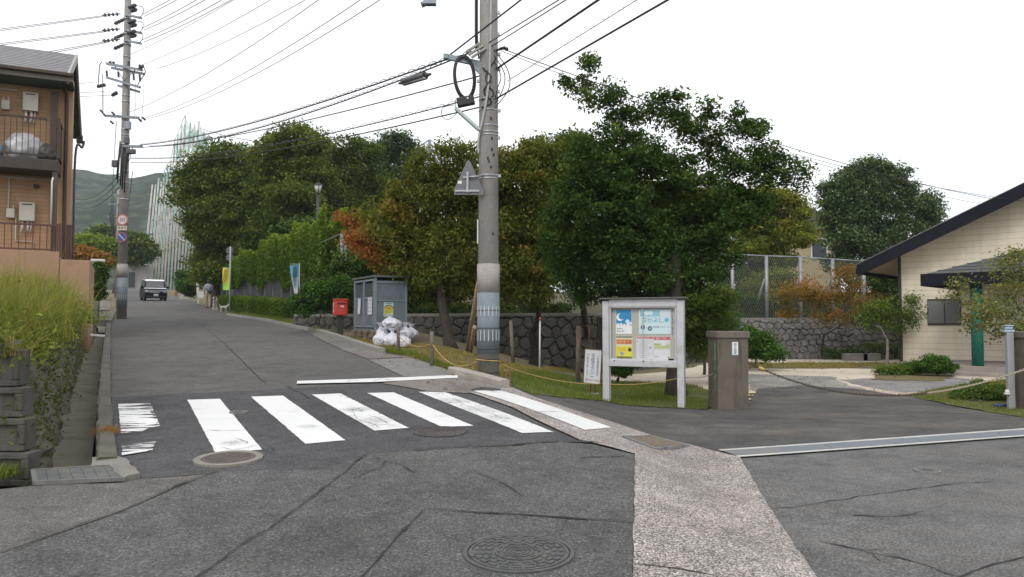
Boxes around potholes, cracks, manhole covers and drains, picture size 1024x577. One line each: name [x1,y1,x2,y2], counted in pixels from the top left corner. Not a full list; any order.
drain grate [30,464,127,485]
manhole cover [193,450,263,468]
manhole cover [413,426,467,437]
crack [195,451,414,577]
manhole cover [463,533,574,574]
crack [360,470,633,577]
crack [770,481,992,516]
crack [11,469,217,549]
crack [821,541,1023,577]
